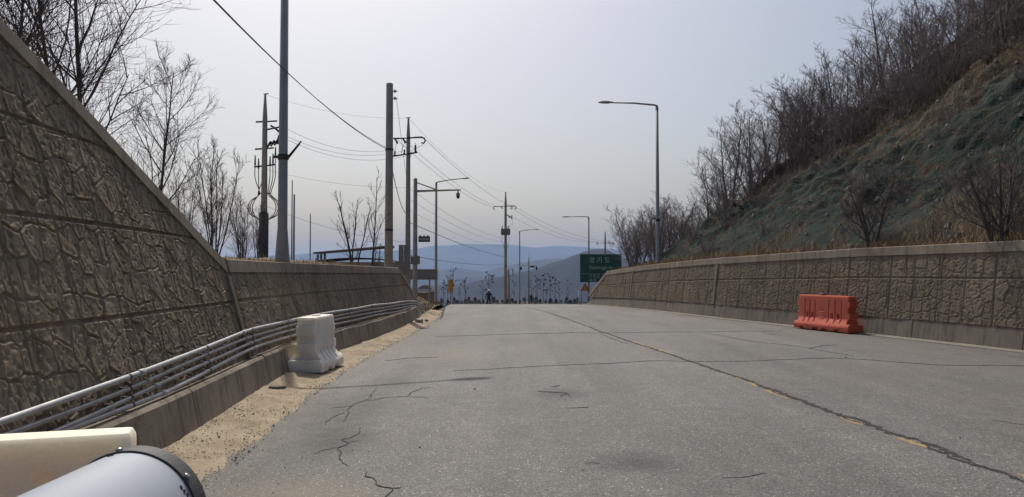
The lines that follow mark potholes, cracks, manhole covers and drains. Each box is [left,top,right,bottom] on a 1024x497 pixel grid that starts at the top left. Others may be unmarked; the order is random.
crack [314,387,431,465]
crack [365,472,401,497]
crack [438,306,1024,482]
